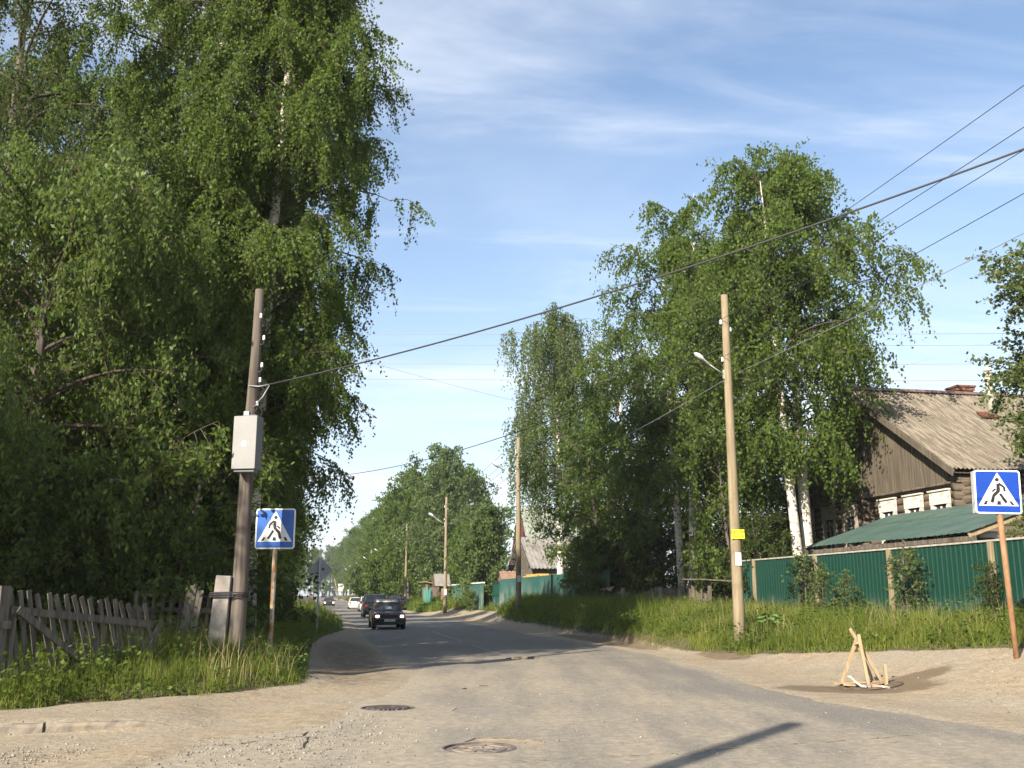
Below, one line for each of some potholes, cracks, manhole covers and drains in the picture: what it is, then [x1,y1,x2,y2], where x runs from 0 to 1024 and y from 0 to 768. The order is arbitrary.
manhole cover [442,742,516,754]
crack [216,732,312,750]
